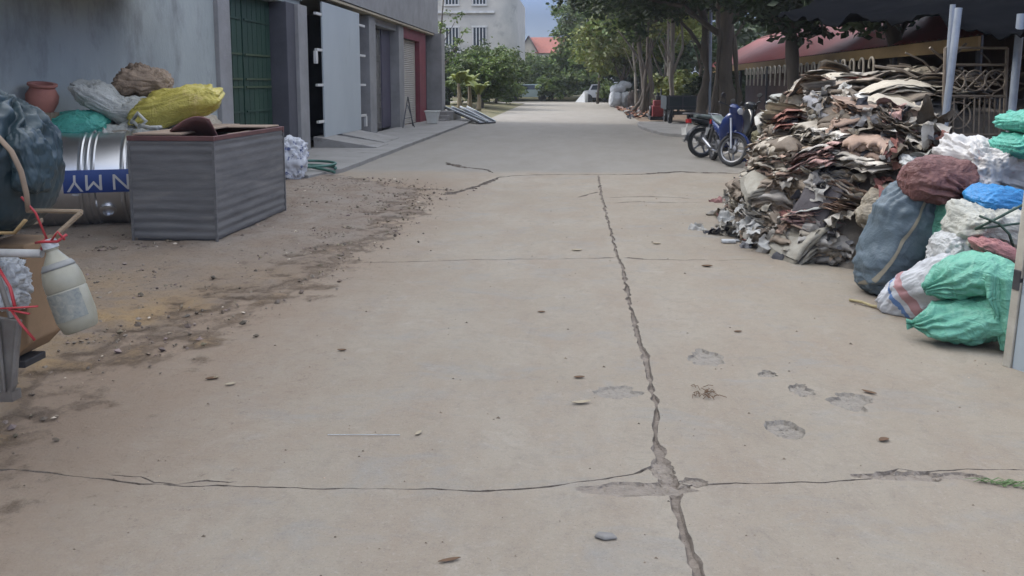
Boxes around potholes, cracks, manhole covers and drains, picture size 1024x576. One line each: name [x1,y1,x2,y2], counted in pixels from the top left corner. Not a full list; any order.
crack [580,192,698,203]
crack [445,162,737,195]
